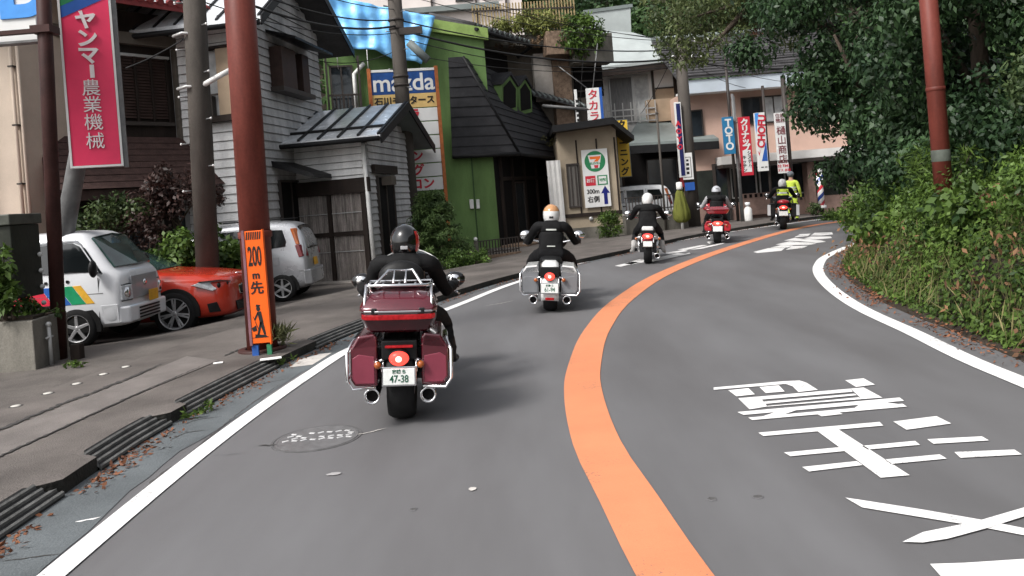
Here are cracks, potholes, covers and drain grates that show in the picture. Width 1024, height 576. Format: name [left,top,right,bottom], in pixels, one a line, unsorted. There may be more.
manhole cover [270,425,362,453]
